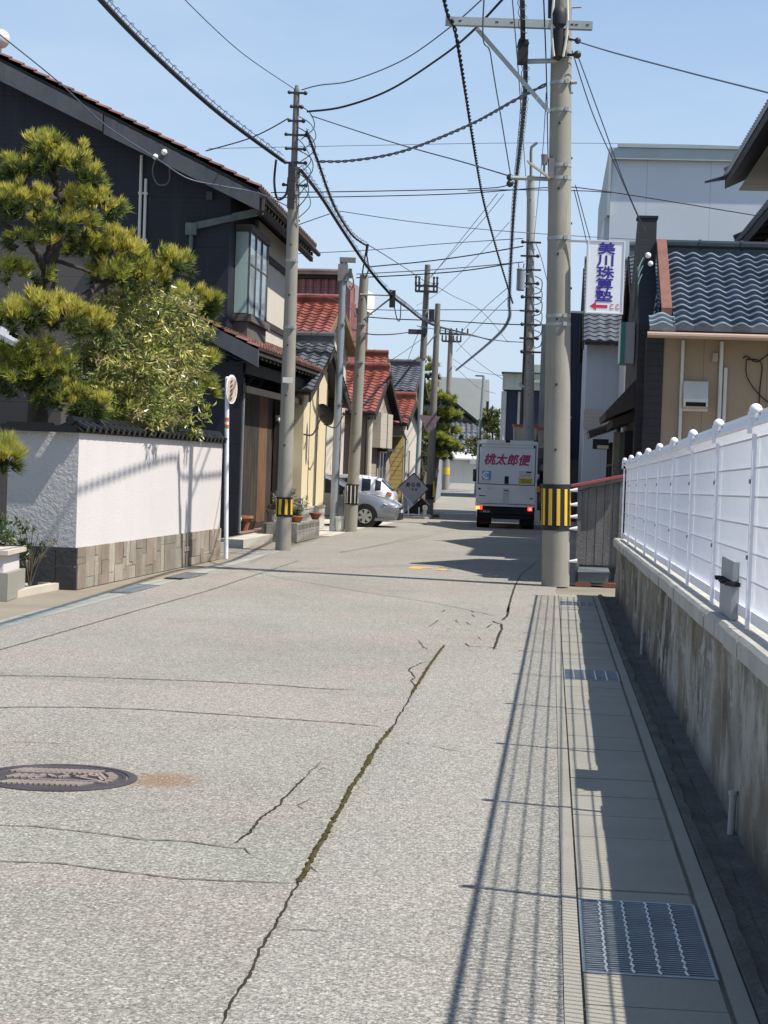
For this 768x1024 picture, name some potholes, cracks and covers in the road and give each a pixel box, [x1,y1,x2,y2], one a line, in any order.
drain grate [165,572,208,580]
drain grate [109,584,159,594]
drain grate [578,898,719,983]
manhole cover [0,764,138,792]
crack [221,561,539,1024]
drain grate [563,669,620,682]
